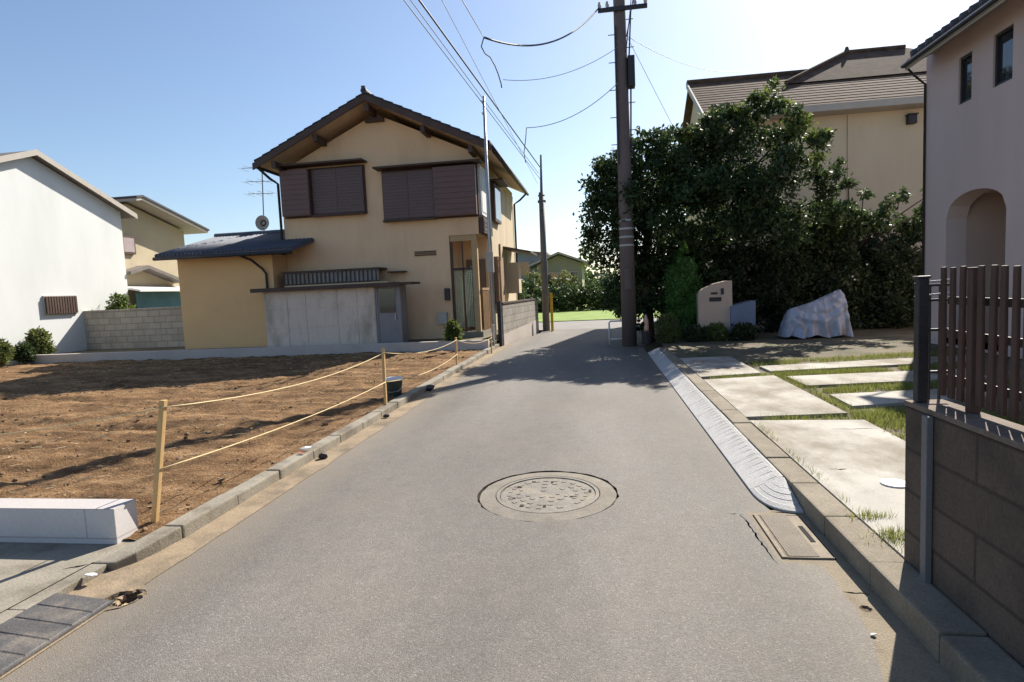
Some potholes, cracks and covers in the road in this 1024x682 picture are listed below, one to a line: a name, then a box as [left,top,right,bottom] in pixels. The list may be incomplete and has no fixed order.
crack [735,513,778,564]
pothole [105,588,146,608]
manhole cover [477,471,619,522]
